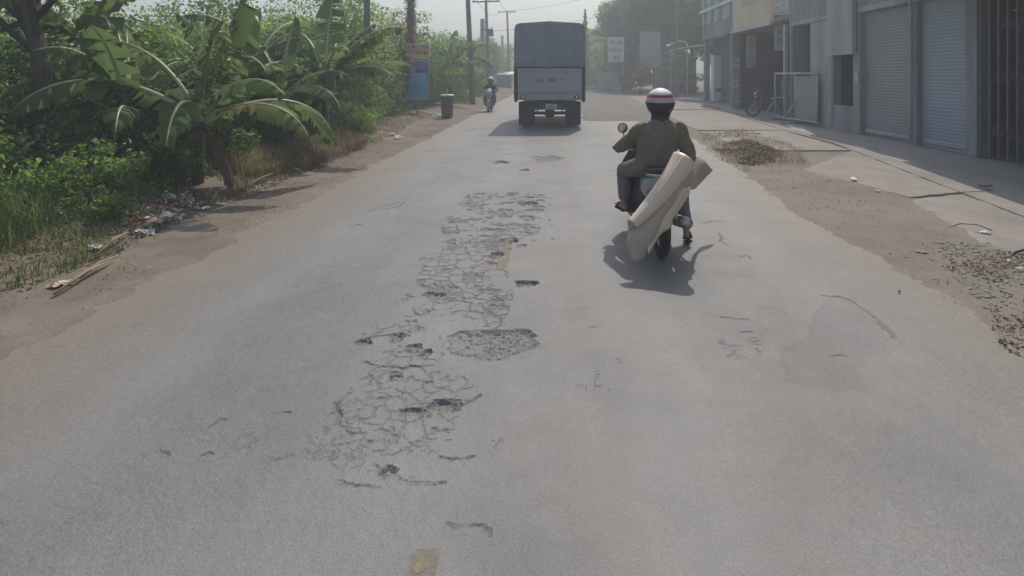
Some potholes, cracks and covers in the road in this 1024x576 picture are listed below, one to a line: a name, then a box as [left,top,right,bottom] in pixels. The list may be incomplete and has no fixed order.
pothole [446,328,540,362]
crack [819,295,898,357]
crack [199,192,555,489]
crack [717,317,763,360]
crack [445,521,494,538]
crack [156,449,172,458]
